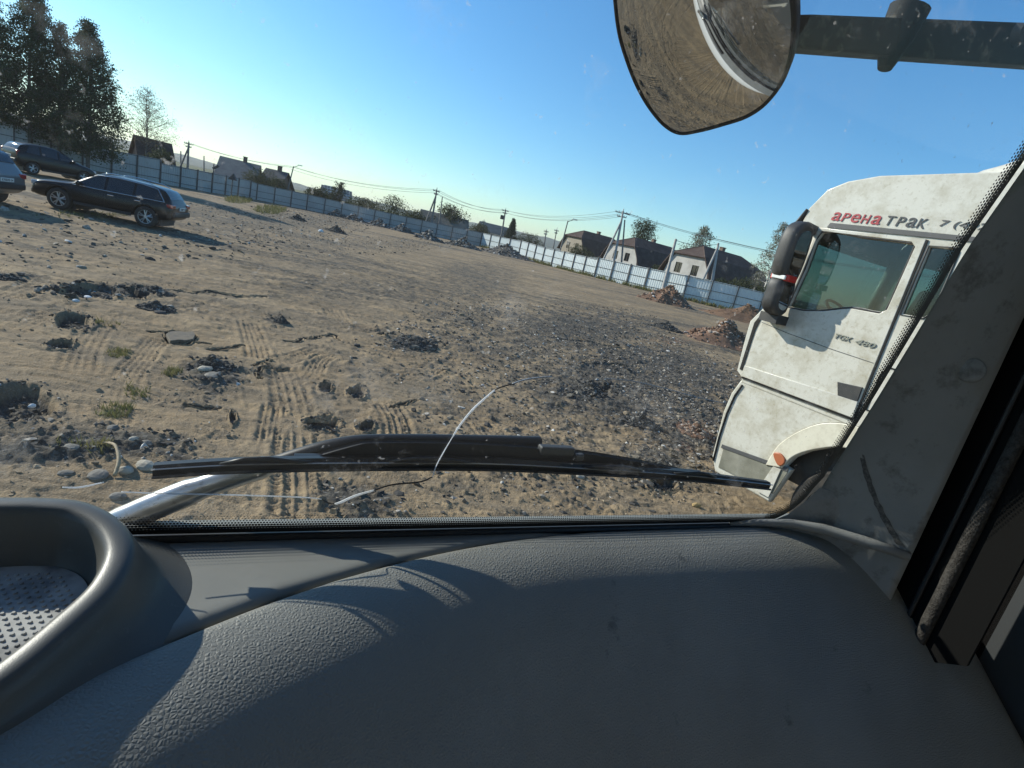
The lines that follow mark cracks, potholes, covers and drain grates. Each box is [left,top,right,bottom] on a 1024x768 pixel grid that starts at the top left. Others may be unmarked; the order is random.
pothole [46,308,99,335]
pothole [0,378,68,435]
pothole [344,382,370,402]
